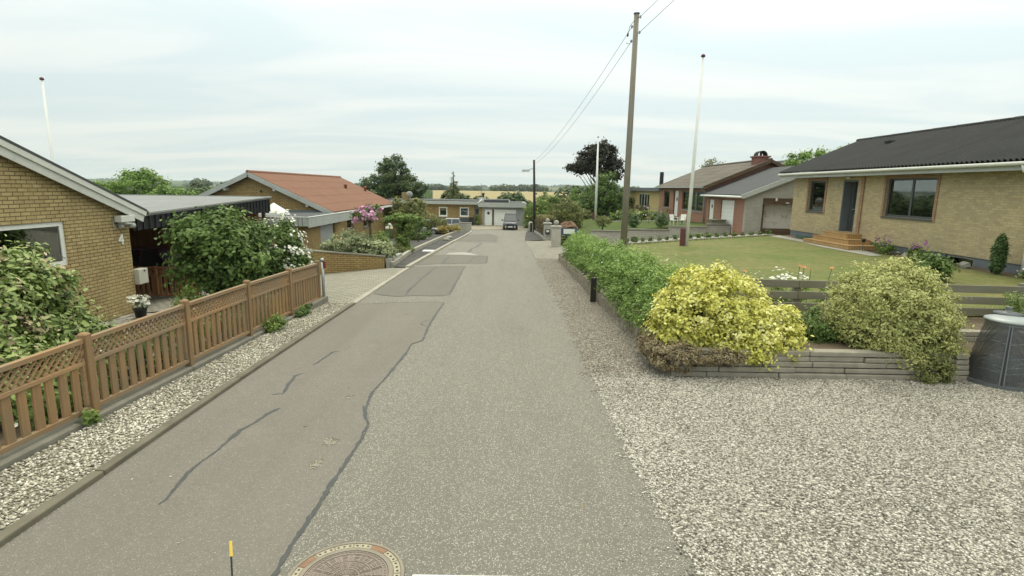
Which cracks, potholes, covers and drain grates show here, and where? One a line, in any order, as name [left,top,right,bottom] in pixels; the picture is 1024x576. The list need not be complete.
manhole cover [287,542,404,576]
